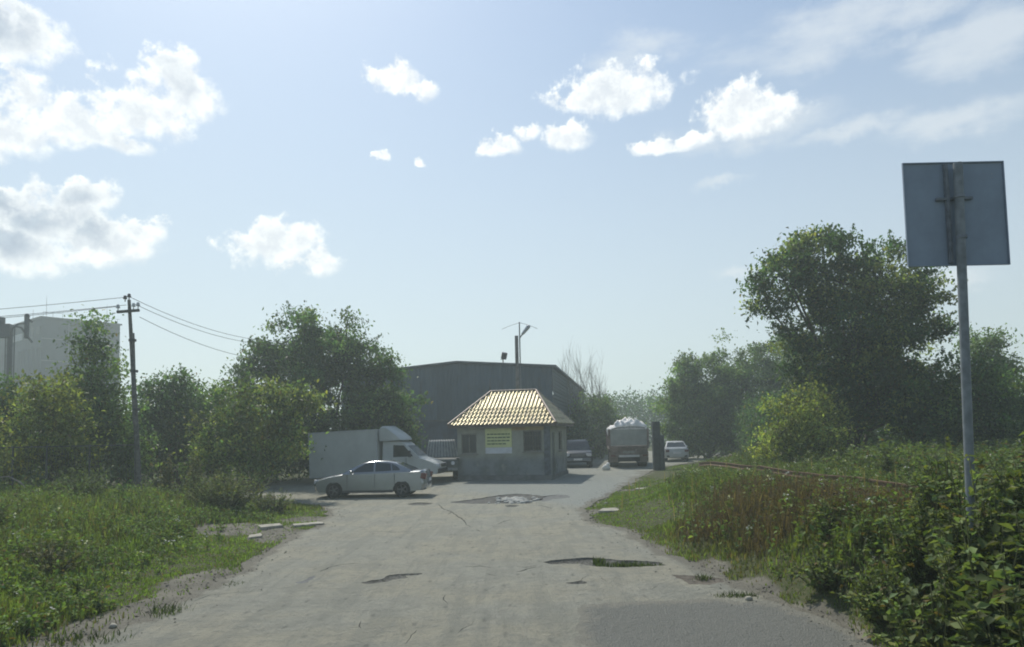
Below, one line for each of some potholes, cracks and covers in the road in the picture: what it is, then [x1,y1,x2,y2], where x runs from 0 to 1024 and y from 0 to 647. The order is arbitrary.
pothole [361,573,422,584]
pothole [673,575,724,585]
pothole [544,558,664,567]
pothole [451,494,546,504]
